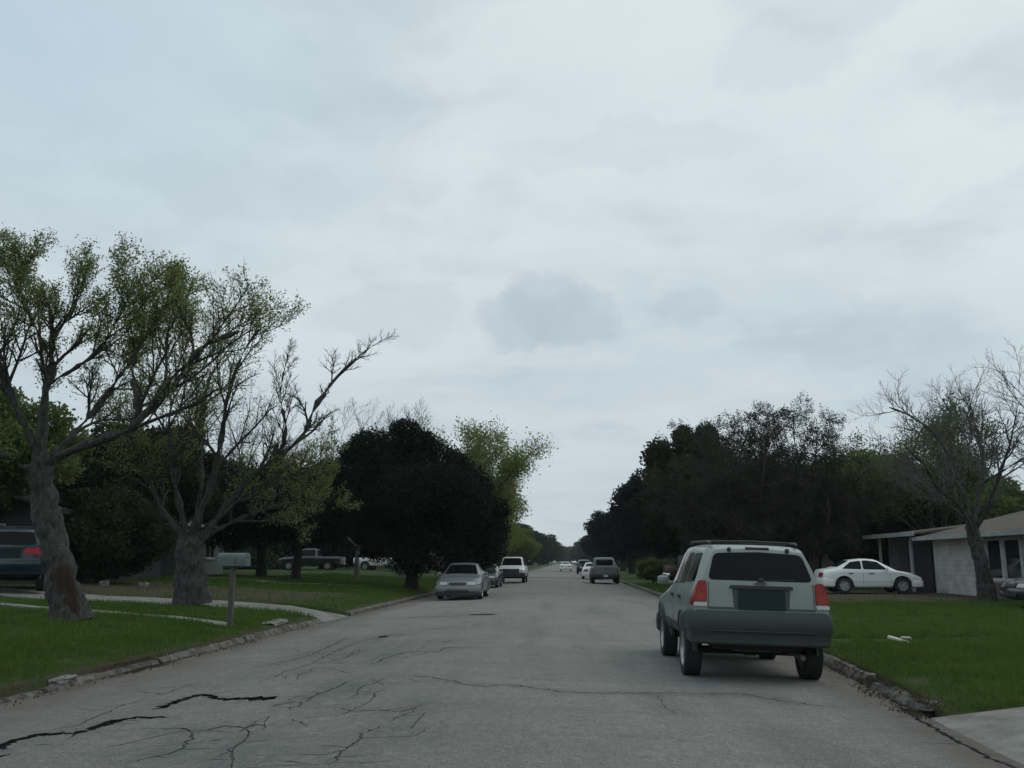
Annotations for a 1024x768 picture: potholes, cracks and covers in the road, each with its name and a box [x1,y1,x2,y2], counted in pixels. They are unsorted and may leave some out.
crack [0,635,820,768]
